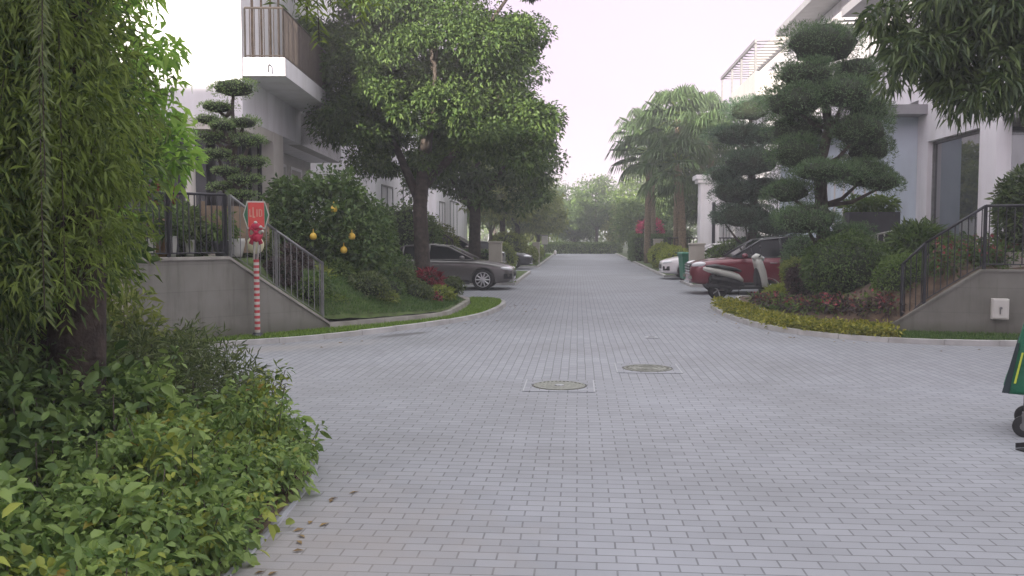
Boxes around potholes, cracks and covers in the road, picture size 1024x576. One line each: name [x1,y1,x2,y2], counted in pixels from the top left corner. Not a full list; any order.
manhole cover [614,363,683,374]
manhole cover [522,379,595,392]
